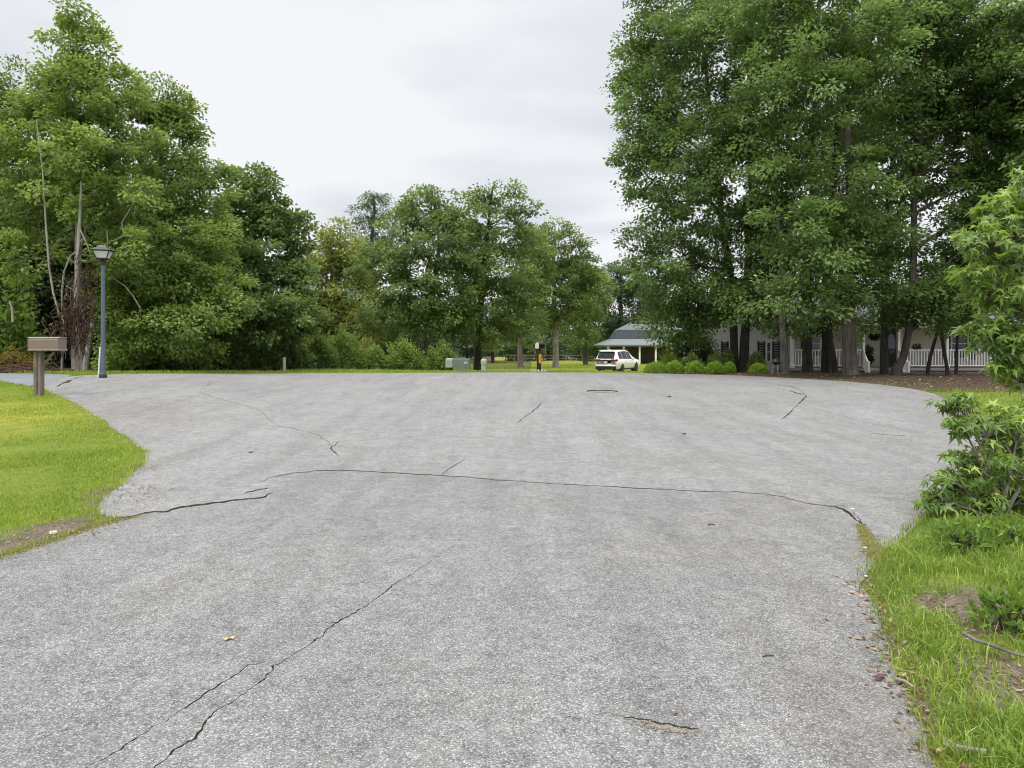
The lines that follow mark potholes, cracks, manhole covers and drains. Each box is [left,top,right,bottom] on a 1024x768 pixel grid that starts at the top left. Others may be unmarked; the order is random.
crack [204,385,898,567]
crack [117,488,271,518]
crack [86,545,454,768]
